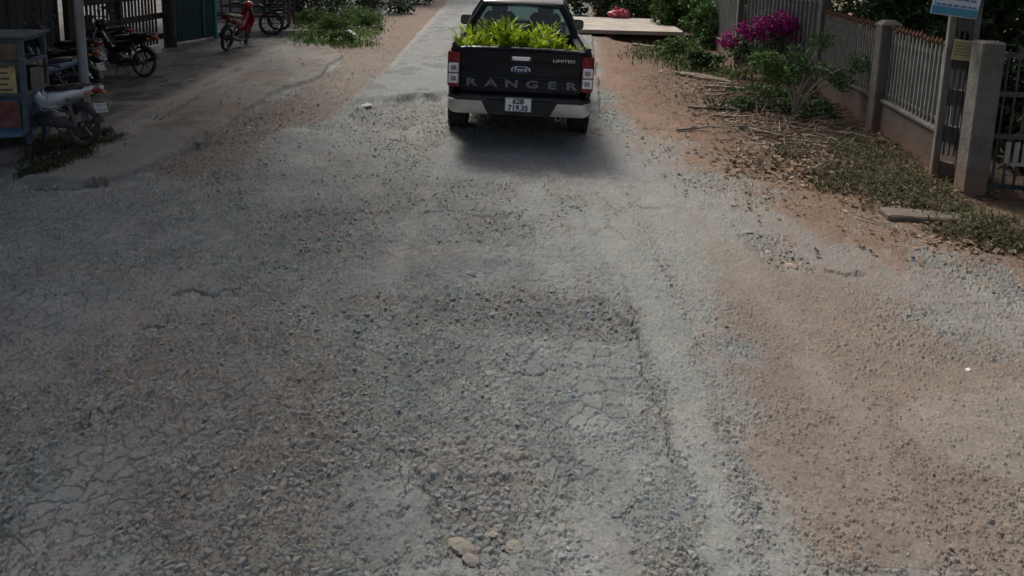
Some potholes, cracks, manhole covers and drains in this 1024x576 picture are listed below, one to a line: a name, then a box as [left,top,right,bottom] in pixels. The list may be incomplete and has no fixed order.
pothole [413,463,529,576]
crack [165,286,241,299]
crack [620,273,675,464]
pothole [396,283,649,352]
